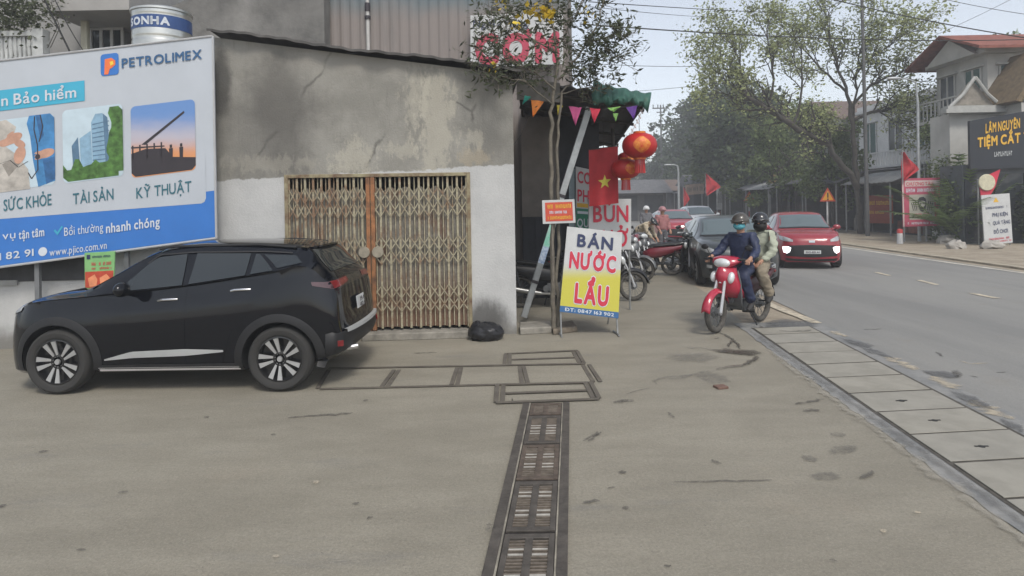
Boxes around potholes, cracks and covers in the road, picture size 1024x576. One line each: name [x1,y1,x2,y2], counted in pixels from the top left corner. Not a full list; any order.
drain grate [506,481,558,533]
drain grate [516,444,560,481]
drain grate [523,415,561,444]
drain grate [529,403,562,416]
drain grate [497,533,555,576]
